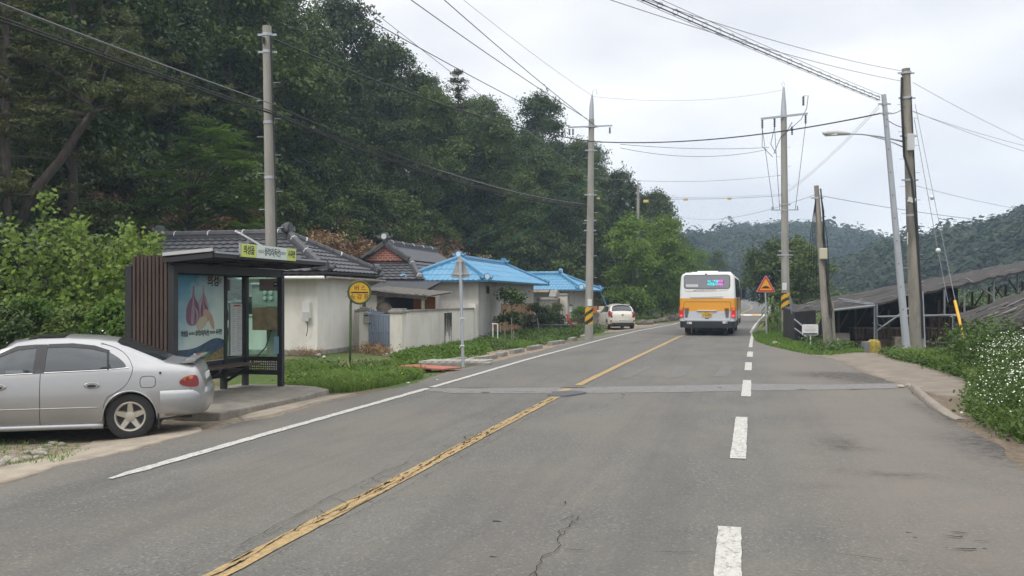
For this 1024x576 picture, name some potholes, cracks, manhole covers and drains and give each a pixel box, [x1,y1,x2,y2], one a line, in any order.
crack [529,492,903,576]
